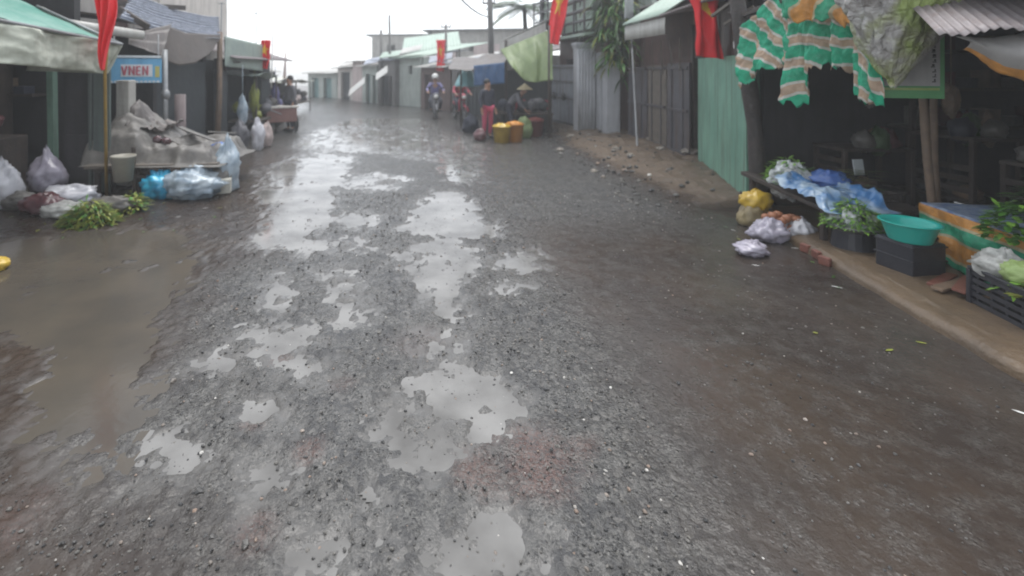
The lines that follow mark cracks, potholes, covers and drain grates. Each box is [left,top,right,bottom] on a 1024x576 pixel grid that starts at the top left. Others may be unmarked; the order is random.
pothole [168,345,256,393]
pothole [387,187,509,243]
pothole [338,355,554,519]
pothole [243,310,349,376]
pothole [105,404,238,516]
pothole [301,259,390,336]
pothole [243,261,318,320]
pothole [241,151,363,257]
pothole [202,376,317,446]
pothole [398,473,579,576]
pothole [482,247,559,278]
